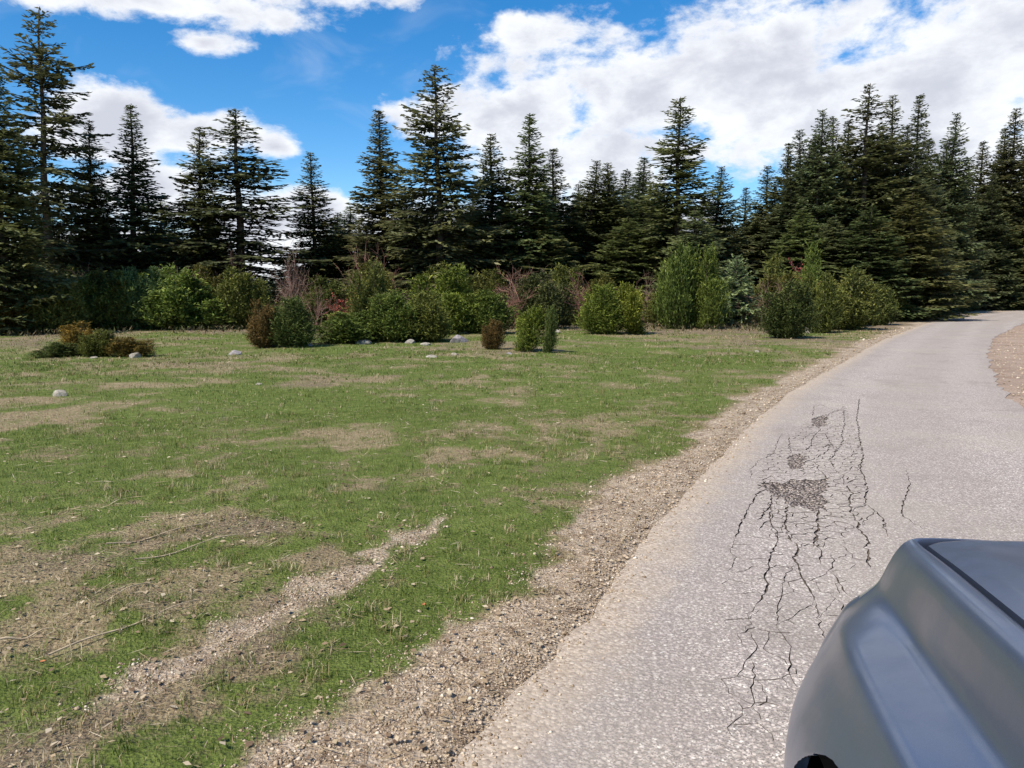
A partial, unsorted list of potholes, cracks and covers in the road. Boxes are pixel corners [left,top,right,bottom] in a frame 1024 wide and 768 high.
crack [721,399,921,741]
pothole [811,415,829,428]
pothole [787,453,807,470]
pothole [758,478,830,511]
